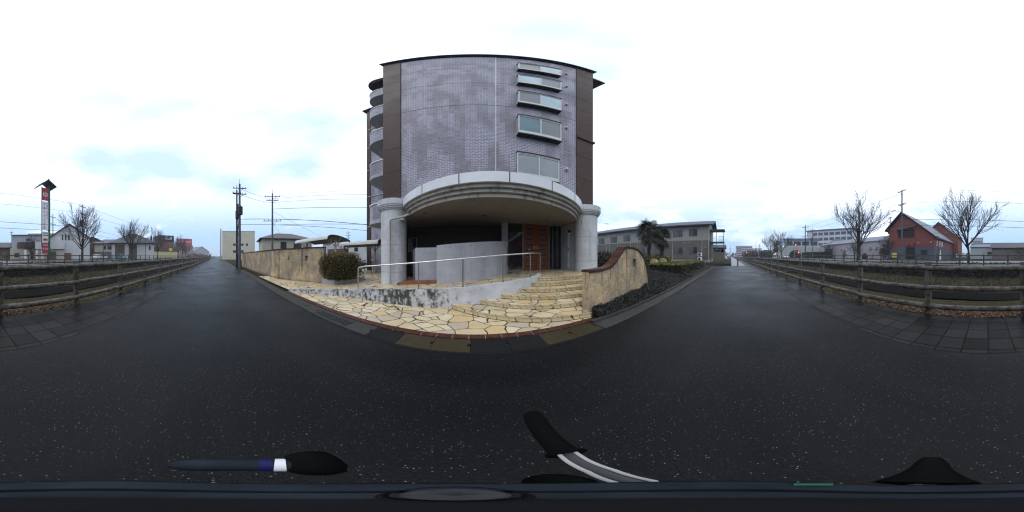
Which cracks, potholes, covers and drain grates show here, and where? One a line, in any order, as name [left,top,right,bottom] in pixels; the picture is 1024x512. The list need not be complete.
drain grate [311,310,356,327]
